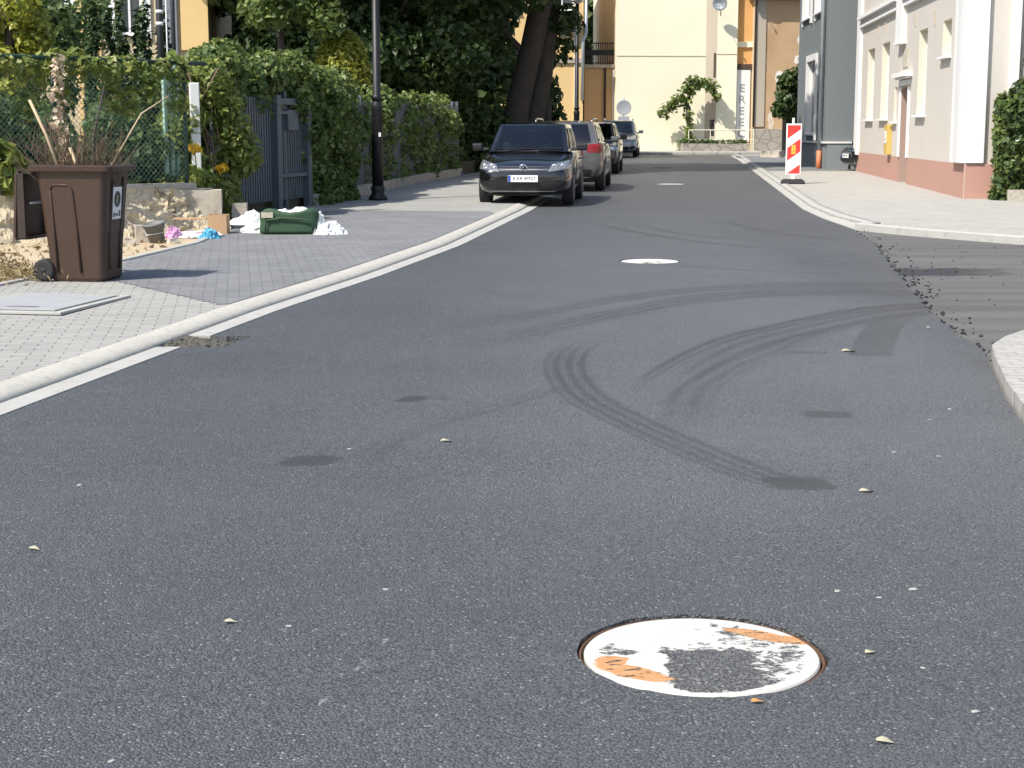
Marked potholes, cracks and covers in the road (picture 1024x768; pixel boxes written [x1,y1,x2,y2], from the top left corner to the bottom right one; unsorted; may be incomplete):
manhole cover [577,618,828,697]
pothole [161,335,246,348]
